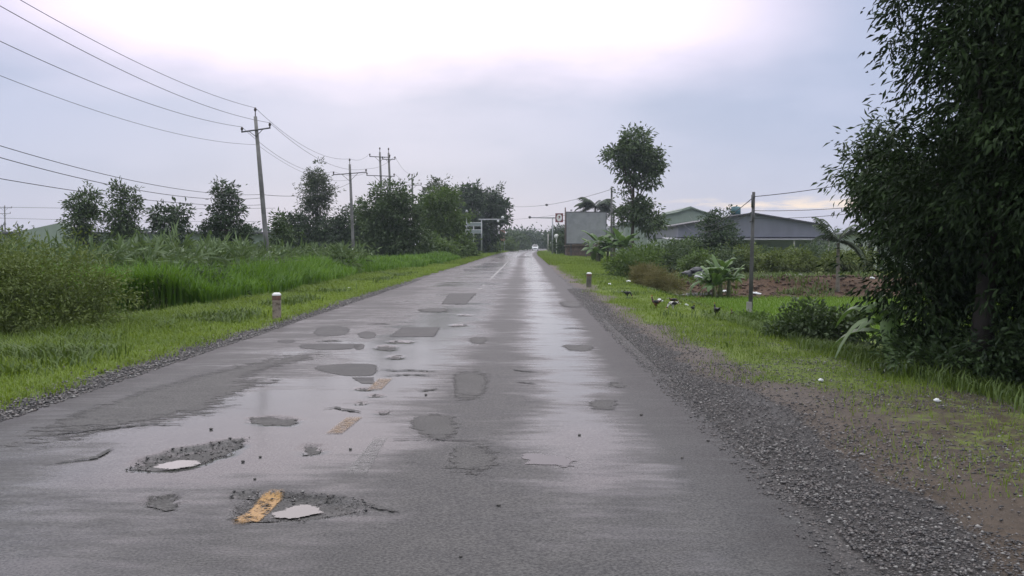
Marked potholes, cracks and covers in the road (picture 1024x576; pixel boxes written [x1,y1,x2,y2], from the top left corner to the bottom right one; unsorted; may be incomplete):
pothole [144,494,178,511]
pothole [228,493,360,523]
pothole [132,438,246,472]
